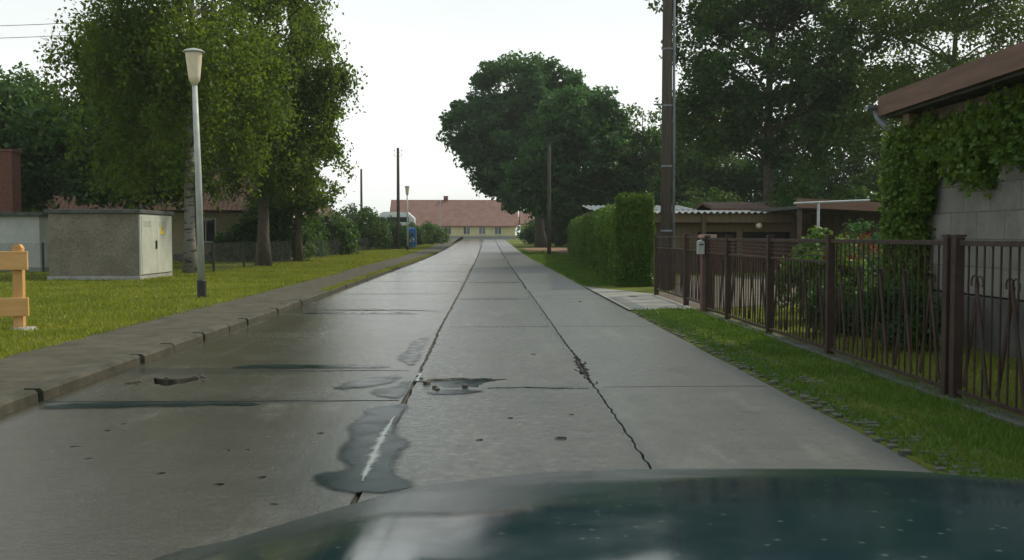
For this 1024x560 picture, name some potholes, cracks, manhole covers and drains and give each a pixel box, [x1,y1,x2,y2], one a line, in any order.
pothole [418,377,507,390]
crack [488,290,652,469]
pothole [136,375,206,386]
